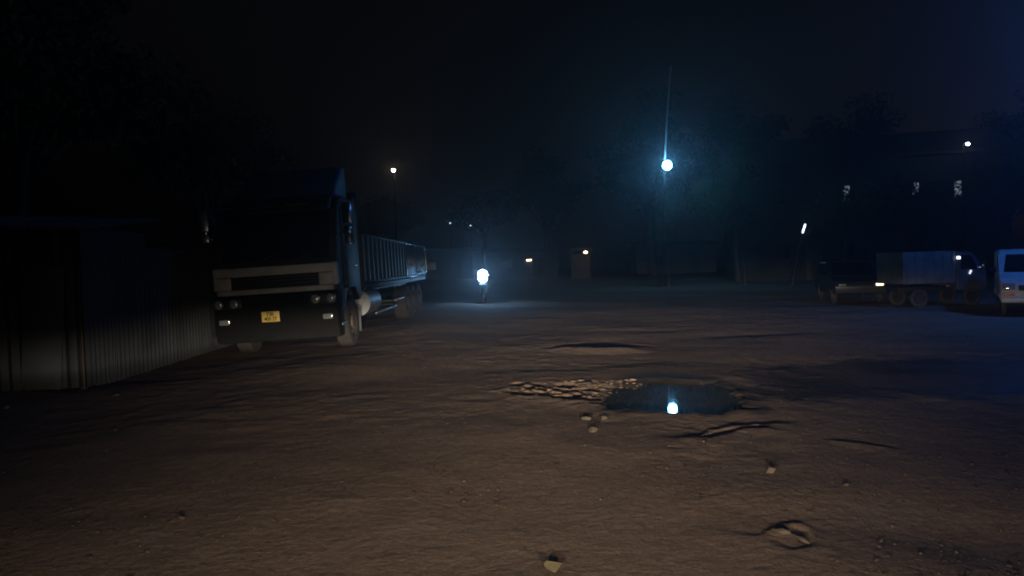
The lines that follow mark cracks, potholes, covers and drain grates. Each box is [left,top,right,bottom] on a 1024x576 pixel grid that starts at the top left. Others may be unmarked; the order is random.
pothole [760,522,822,550]
pothole [504,375,764,412]
